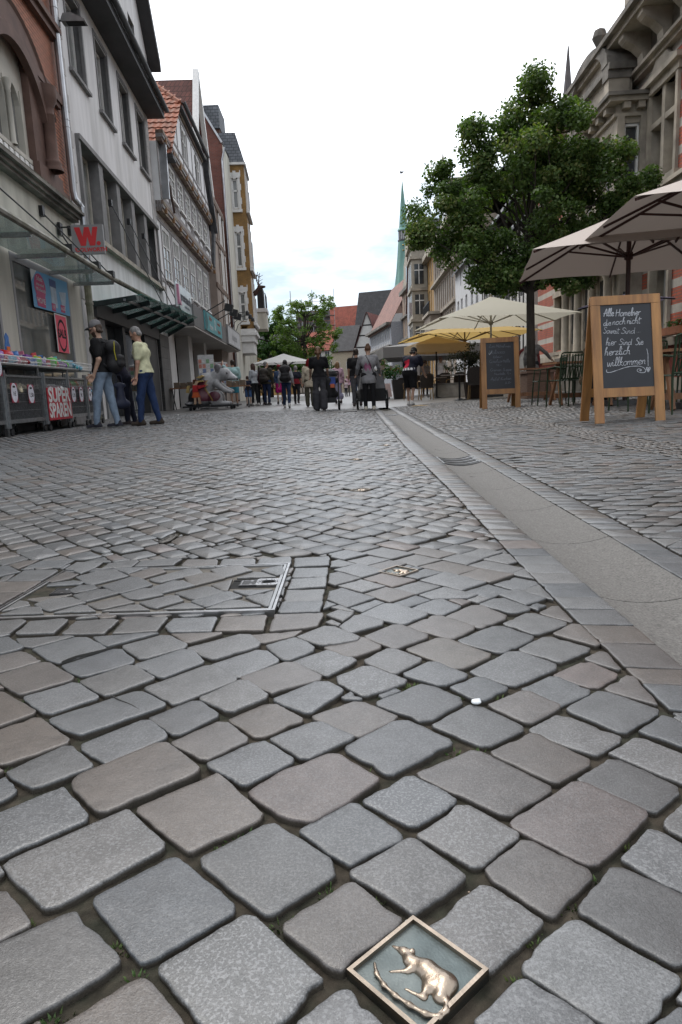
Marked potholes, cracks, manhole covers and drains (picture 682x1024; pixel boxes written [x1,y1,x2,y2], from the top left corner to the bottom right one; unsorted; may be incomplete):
manhole cover [0,563,291,621]
drain grate [436,455,481,466]
